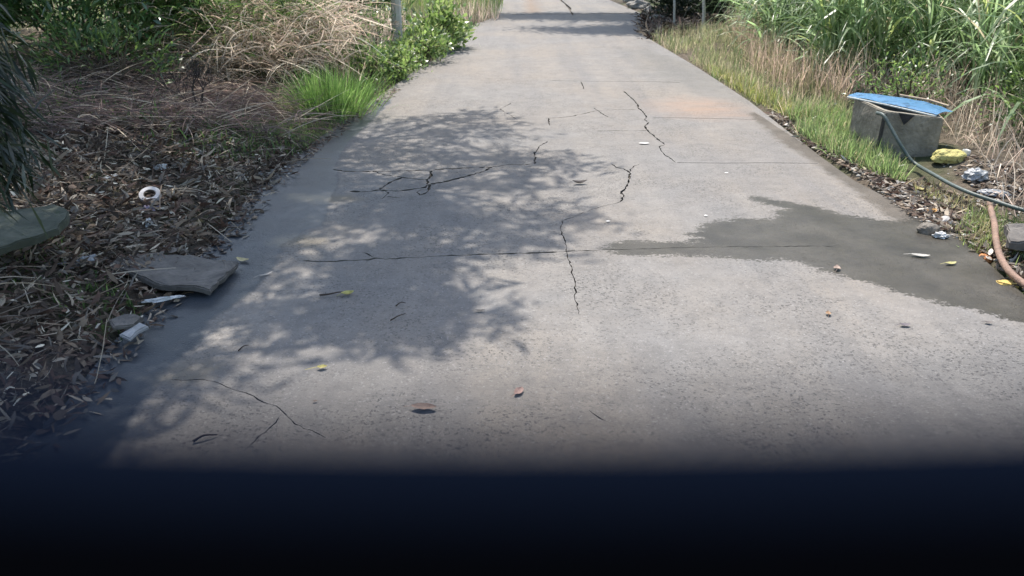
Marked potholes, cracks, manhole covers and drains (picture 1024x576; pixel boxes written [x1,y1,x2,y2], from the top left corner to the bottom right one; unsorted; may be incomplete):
crack [304,164,830,314]
crack [333,142,547,199]
crack [170,379,264,402]
crack [548,92,675,162]
